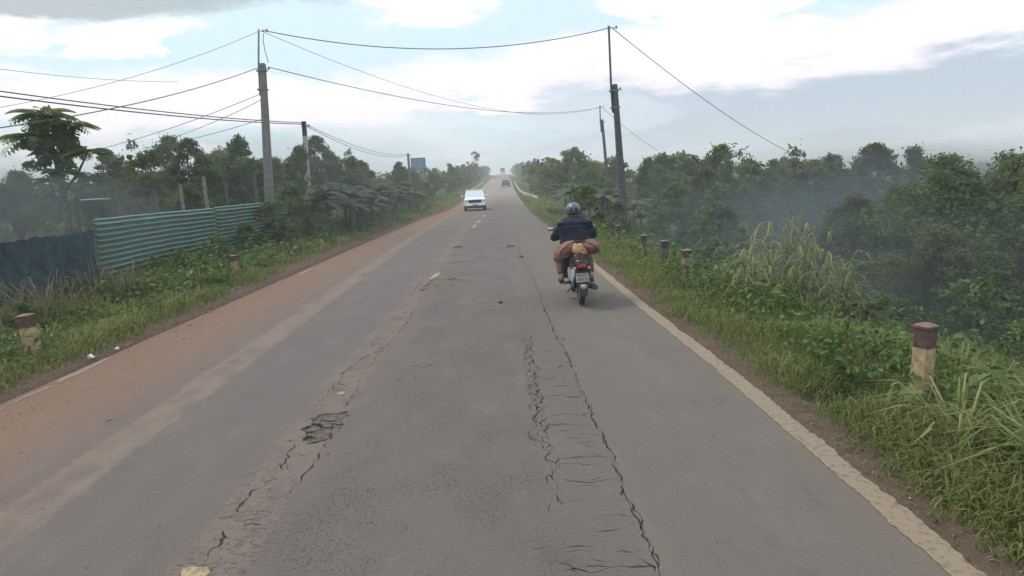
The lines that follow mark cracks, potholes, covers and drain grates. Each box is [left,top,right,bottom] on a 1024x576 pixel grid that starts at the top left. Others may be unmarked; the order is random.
crack [519,248,660,576]
pothole [300,411,351,444]
crack [185,250,445,565]
